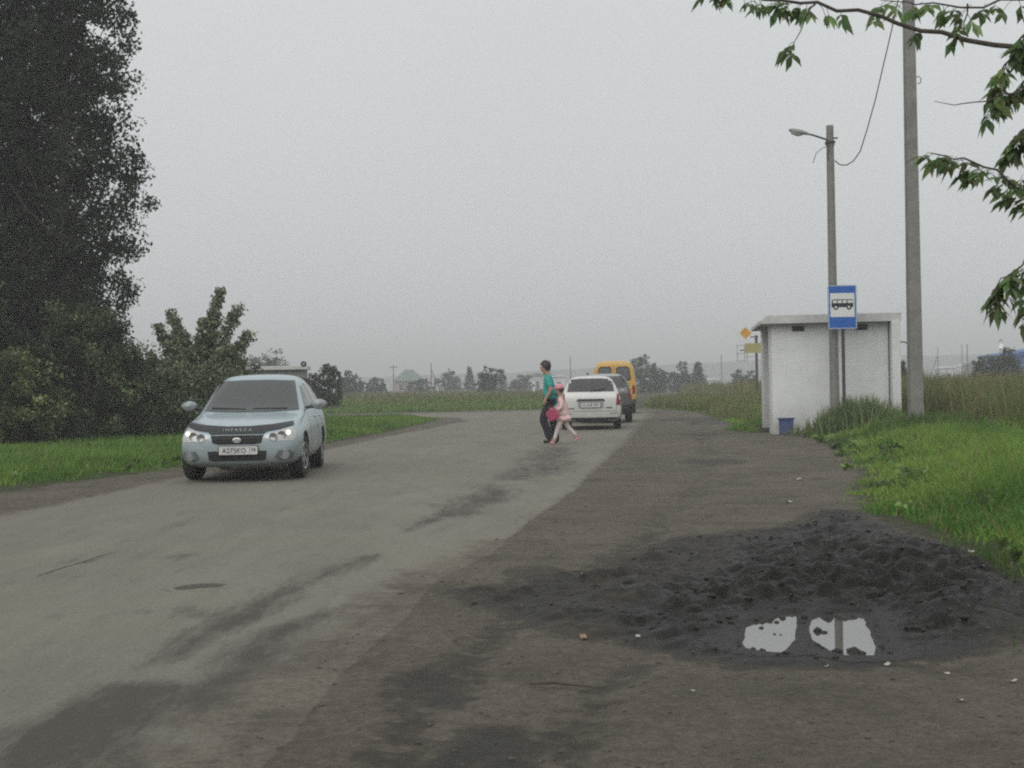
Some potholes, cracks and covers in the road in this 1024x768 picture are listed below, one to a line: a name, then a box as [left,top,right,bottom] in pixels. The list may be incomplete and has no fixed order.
crack [36,553,110,577]
pothole [802,607,890,655]
pothole [729,608,808,652]
